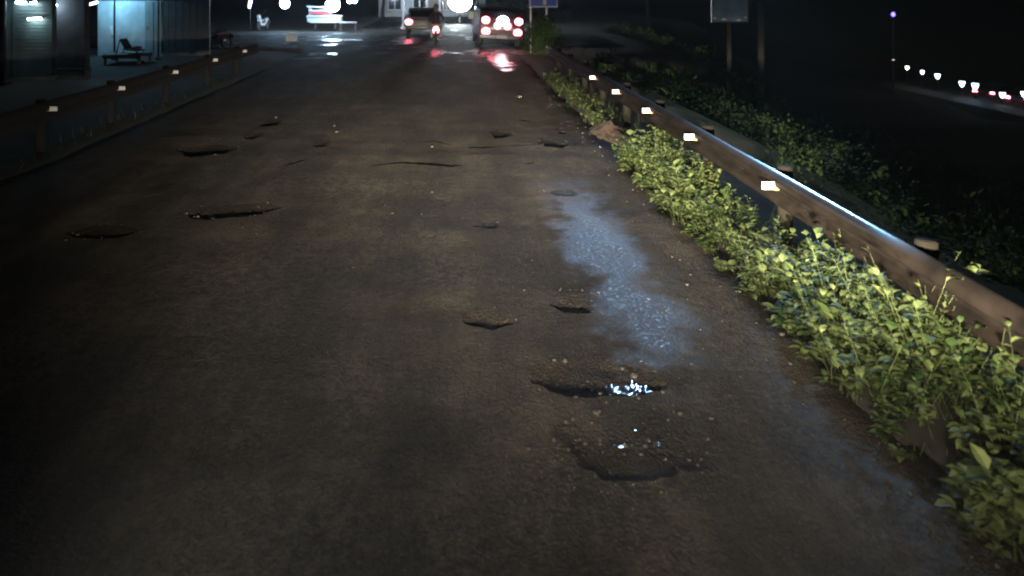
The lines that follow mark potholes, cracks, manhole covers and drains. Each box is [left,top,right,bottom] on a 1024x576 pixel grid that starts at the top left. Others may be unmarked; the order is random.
pothole [243,132,265,140]
pothole [537,137,568,148]
pothole [526,353,667,398]
pothole [64,225,139,239]
pothole [488,129,514,139]
pothole [460,307,515,330]
pothole [548,290,600,314]
pothole [549,407,712,481]
pothole [188,203,285,220]
pothole [176,145,237,157]
crack [371,145,534,167]
pothole [259,118,284,126]
